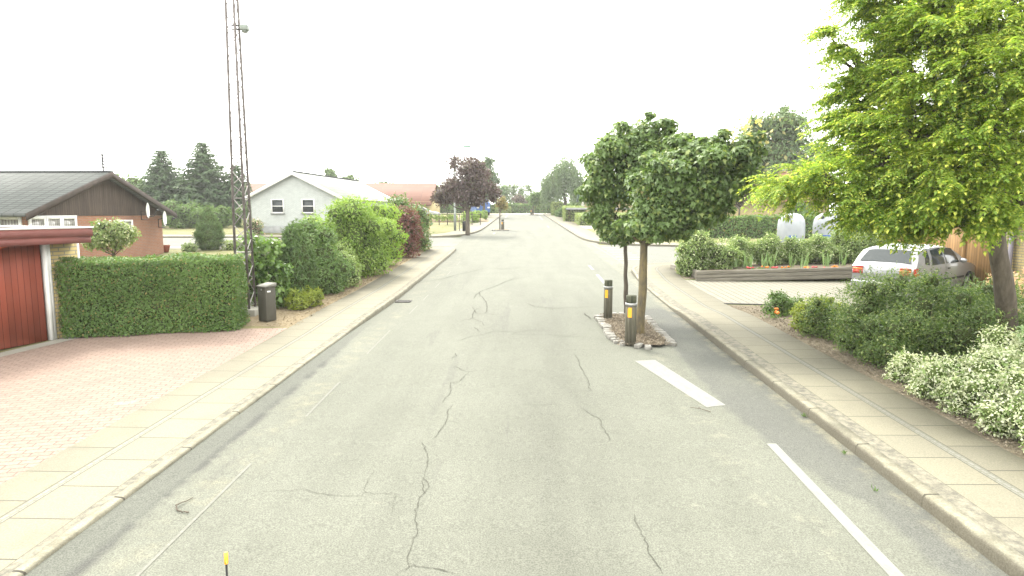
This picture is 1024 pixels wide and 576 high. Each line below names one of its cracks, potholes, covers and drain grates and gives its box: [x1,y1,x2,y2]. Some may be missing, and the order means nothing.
crack [396,267,591,574]
crack [634,514,662,572]
